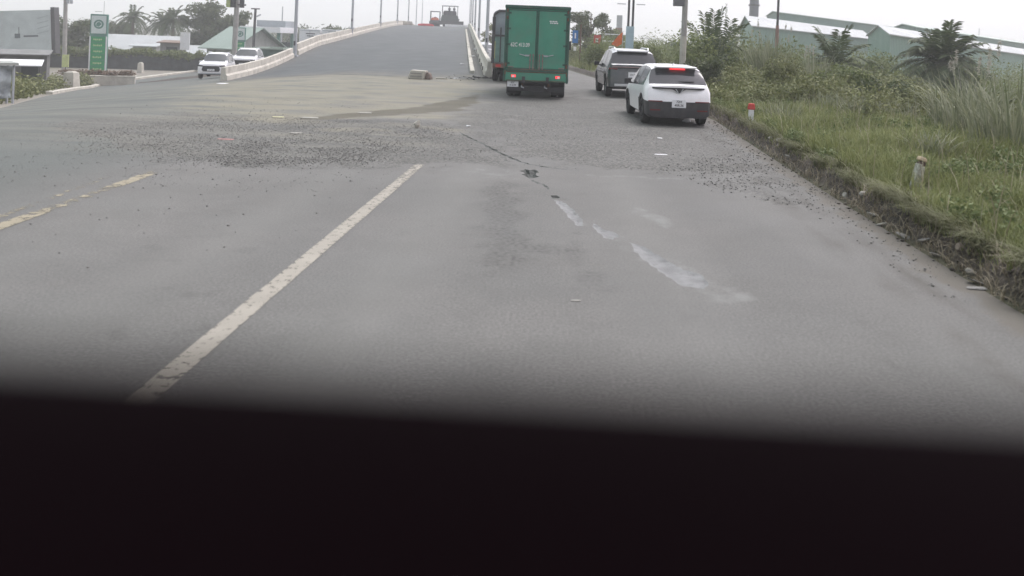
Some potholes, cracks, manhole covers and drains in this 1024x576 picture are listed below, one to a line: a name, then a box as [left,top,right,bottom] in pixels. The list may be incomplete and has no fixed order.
pothole [521,169,540,179]
crack [460,132,577,189]
